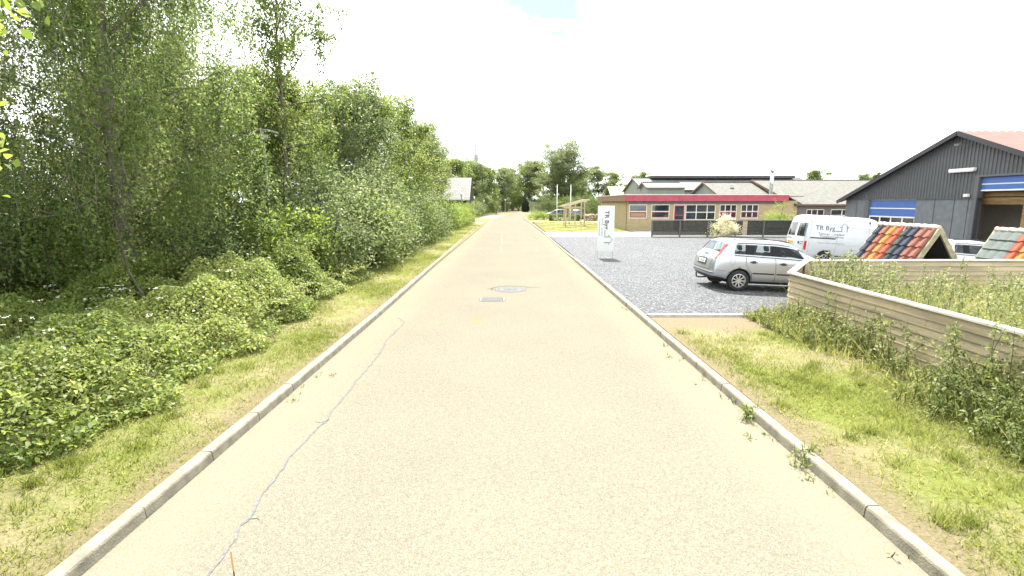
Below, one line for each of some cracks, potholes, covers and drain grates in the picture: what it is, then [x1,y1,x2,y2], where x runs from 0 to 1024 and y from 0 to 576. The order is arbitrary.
crack [207,317,404,576]
